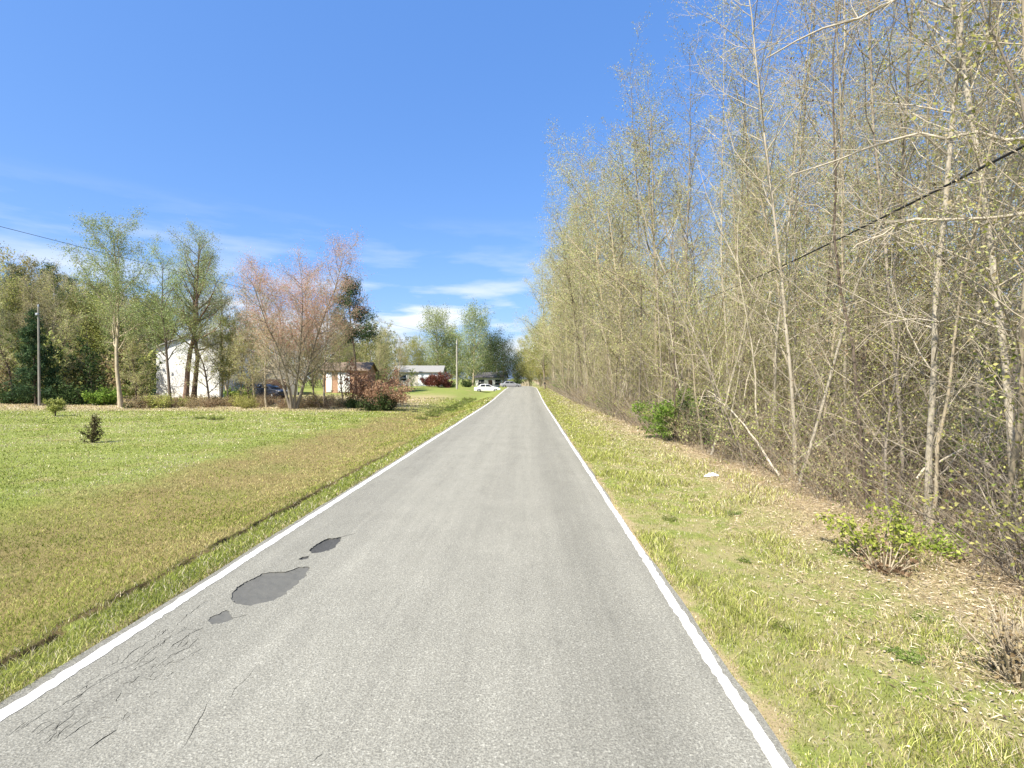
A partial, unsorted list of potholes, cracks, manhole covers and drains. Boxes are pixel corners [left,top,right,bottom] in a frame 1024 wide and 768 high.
pothole [231,567,310,606]
pothole [309,538,341,553]
pothole [208,610,233,624]
crack [18,608,200,748]
